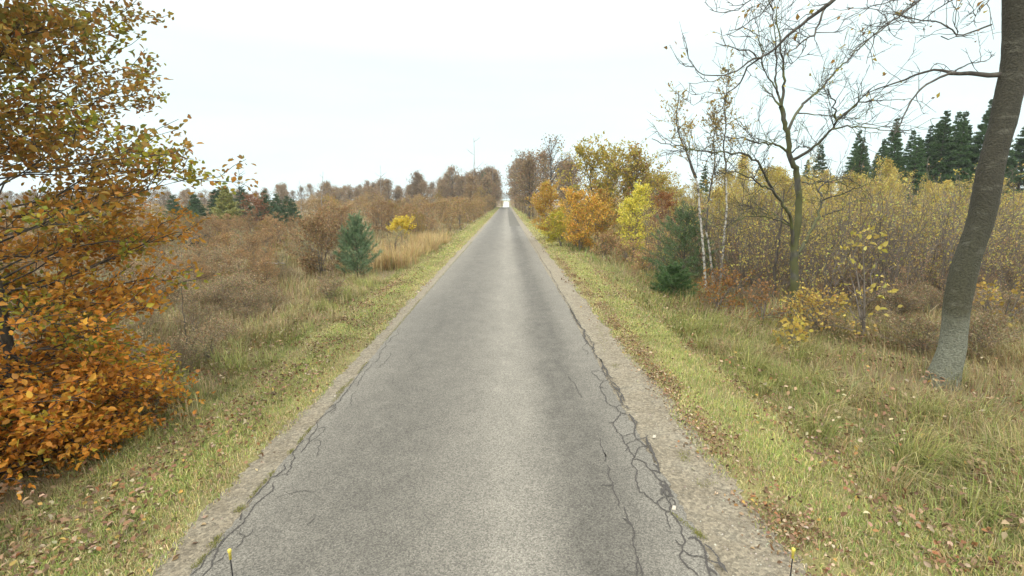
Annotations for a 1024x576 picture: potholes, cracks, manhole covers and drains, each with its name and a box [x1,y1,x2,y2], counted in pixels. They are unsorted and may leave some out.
crack [191,330,399,575]
crack [521,228,728,576]
